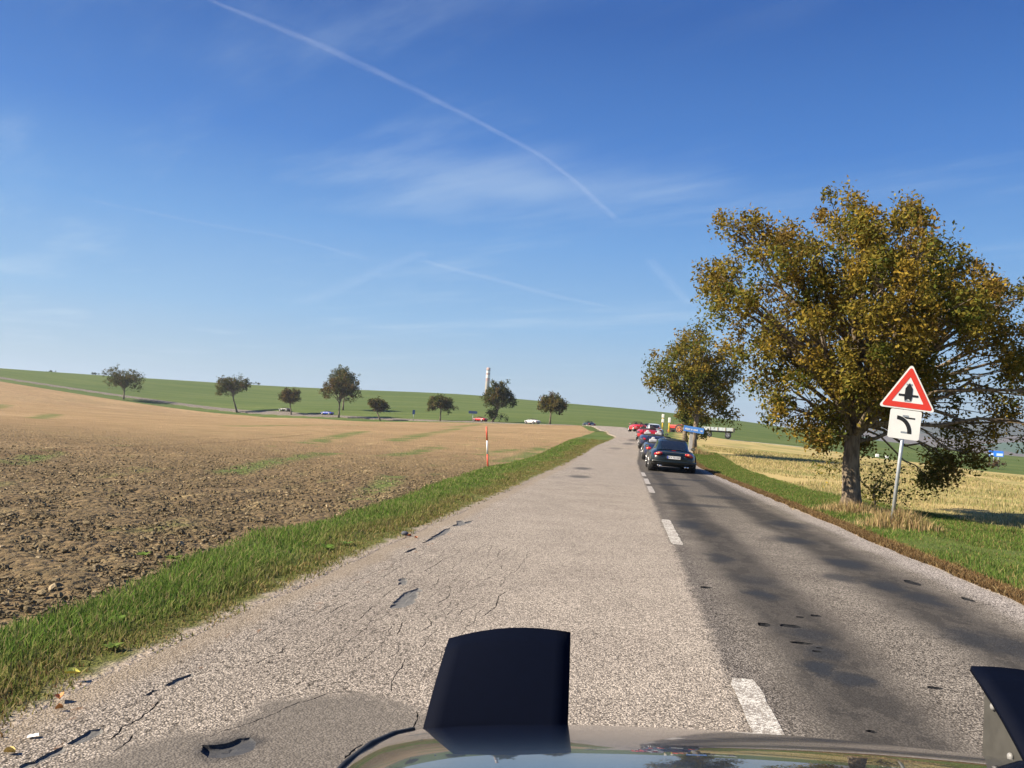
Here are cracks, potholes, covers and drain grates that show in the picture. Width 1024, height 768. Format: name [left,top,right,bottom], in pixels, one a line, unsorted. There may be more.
pothole [67,728,103,744]
pothole [201,737,256,758]
crack [246,537,528,691]
pothole [390,588,422,608]
